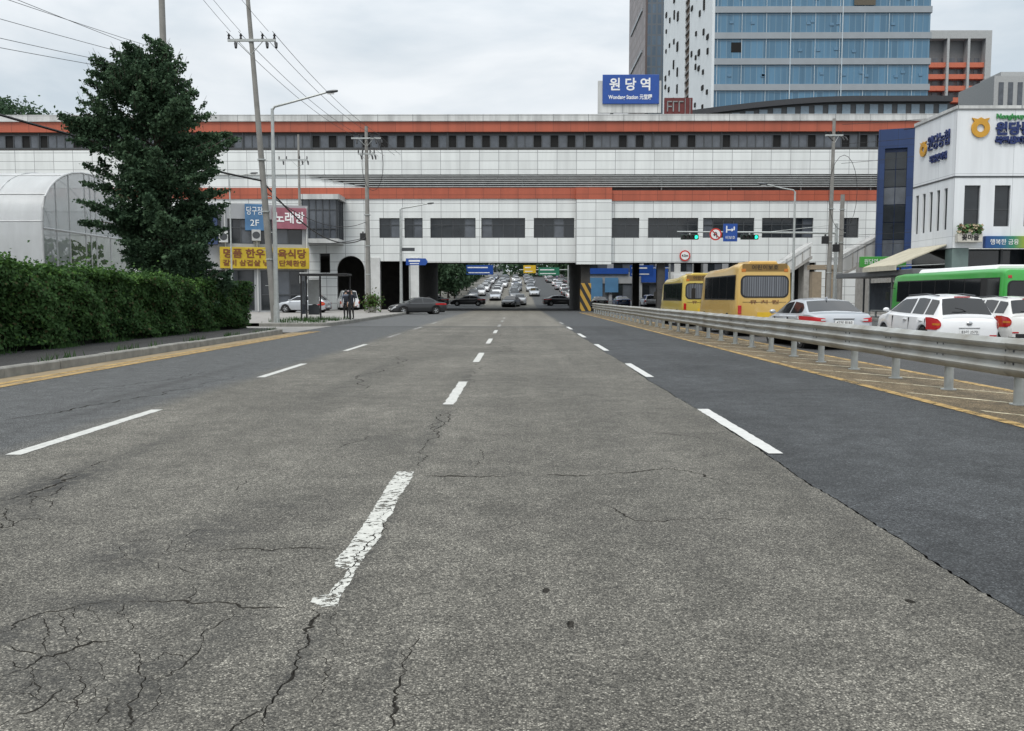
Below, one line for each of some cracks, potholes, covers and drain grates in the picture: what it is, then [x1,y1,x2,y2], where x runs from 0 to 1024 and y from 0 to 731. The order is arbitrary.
crack [0,509,392,731]
crack [406,334,729,484]
crack [387,638,433,731]
crack [607,505,745,522]
crack [0,461,108,528]
